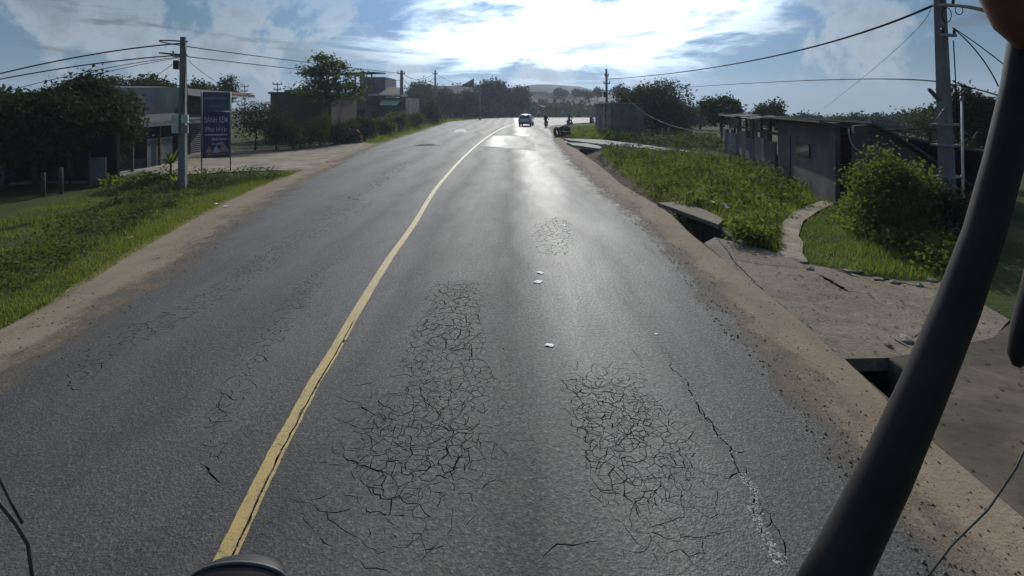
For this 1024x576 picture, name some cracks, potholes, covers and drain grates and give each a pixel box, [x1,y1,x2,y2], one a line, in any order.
crack [532,217,575,256]
crack [289,280,514,574]
crack [559,360,731,571]
crack [543,541,596,557]
